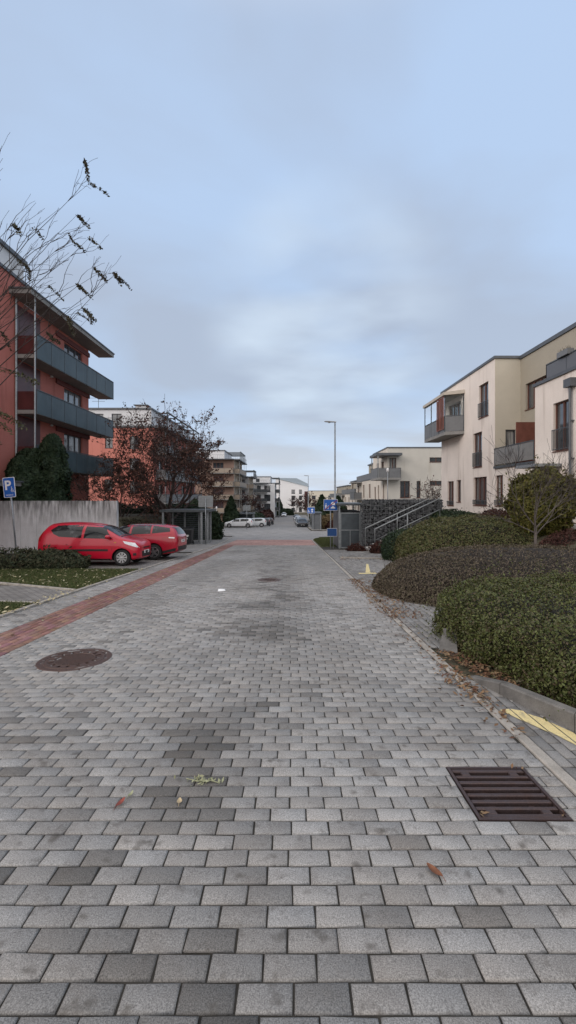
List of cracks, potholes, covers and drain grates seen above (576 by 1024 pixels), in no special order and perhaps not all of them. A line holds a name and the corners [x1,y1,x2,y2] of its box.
drain grate [446,767,573,822]
manhole cover [35,648,112,673]
